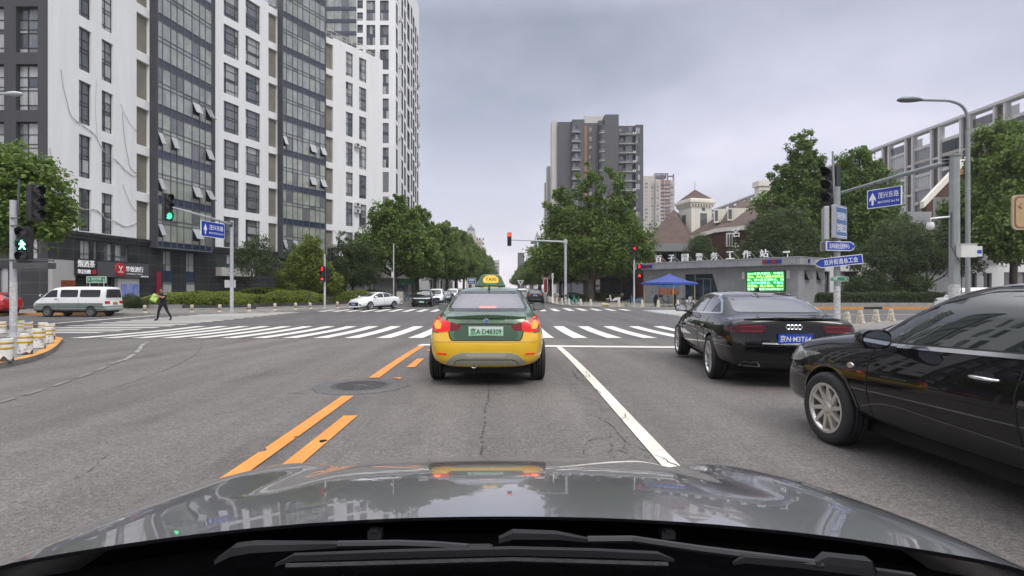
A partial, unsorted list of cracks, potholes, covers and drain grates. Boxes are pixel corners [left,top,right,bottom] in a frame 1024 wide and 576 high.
crack [560,368,678,466]
manhole cover [310,378,410,395]
